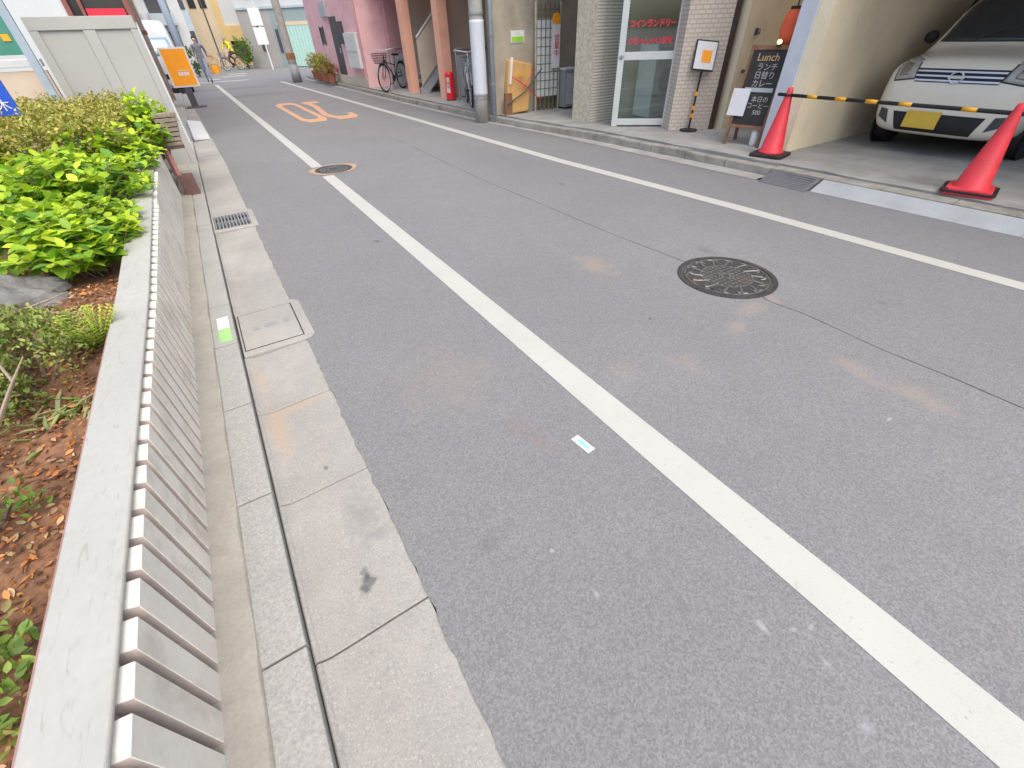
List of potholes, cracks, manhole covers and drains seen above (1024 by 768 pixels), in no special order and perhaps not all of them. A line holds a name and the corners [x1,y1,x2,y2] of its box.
manhole cover [309,164,357,175]
manhole cover [677,257,779,299]
drain grate [211,209,259,234]
